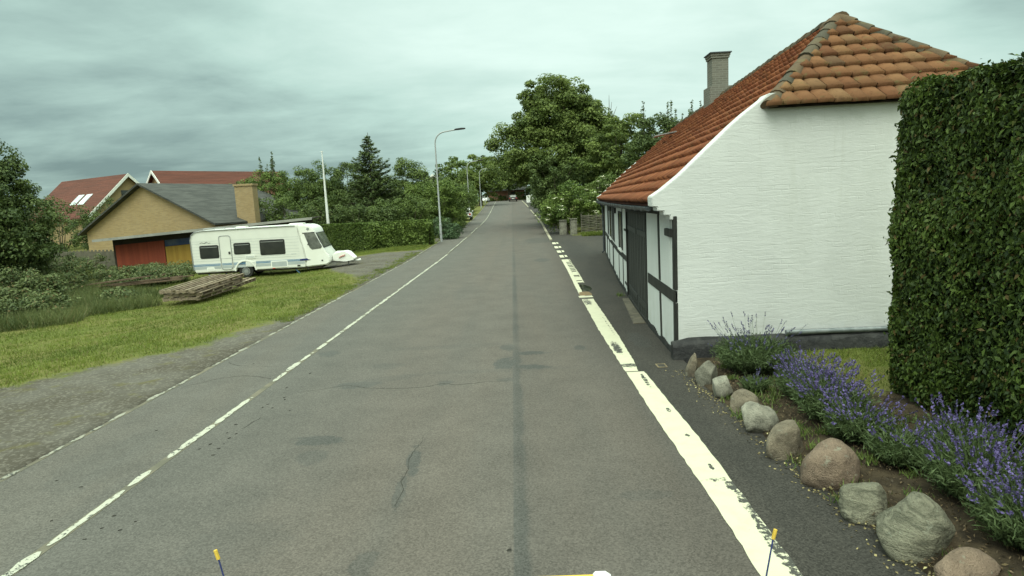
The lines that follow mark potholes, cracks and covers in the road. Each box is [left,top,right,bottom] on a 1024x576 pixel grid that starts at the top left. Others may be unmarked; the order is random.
crack [297,381,488,393]
crack [395,437,423,508]
